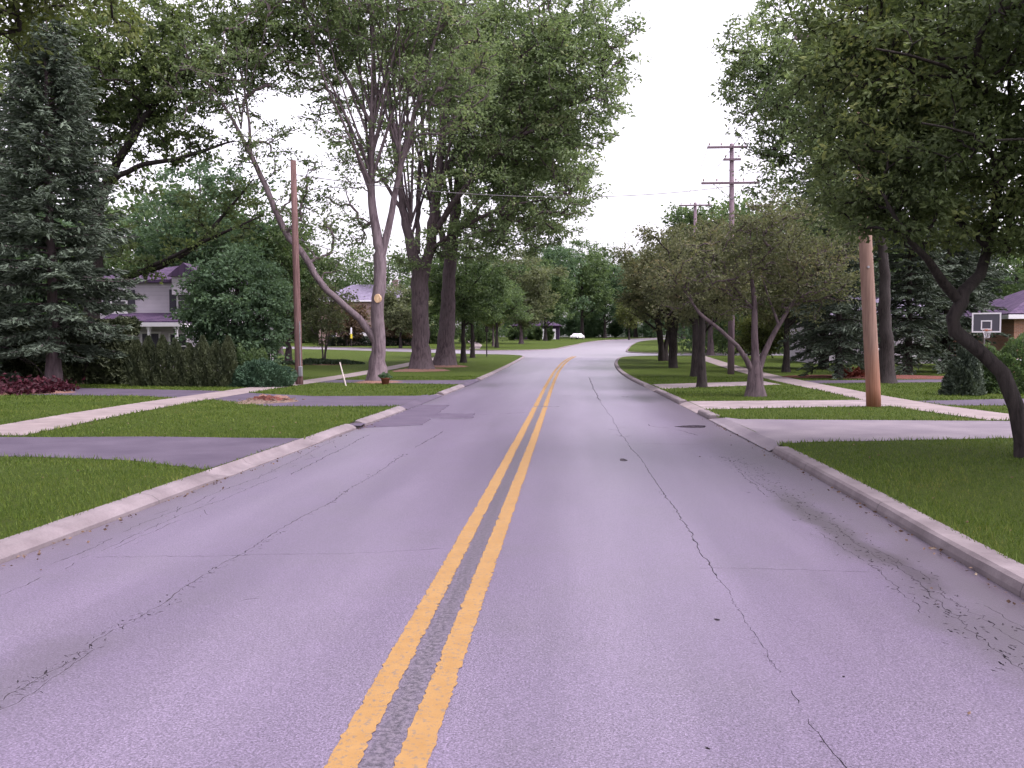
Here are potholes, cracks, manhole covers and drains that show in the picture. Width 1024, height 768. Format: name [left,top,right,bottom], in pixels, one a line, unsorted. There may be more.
crack [719,456,1024,671]
crack [589,378,847,768]
crack [0,431,443,709]
